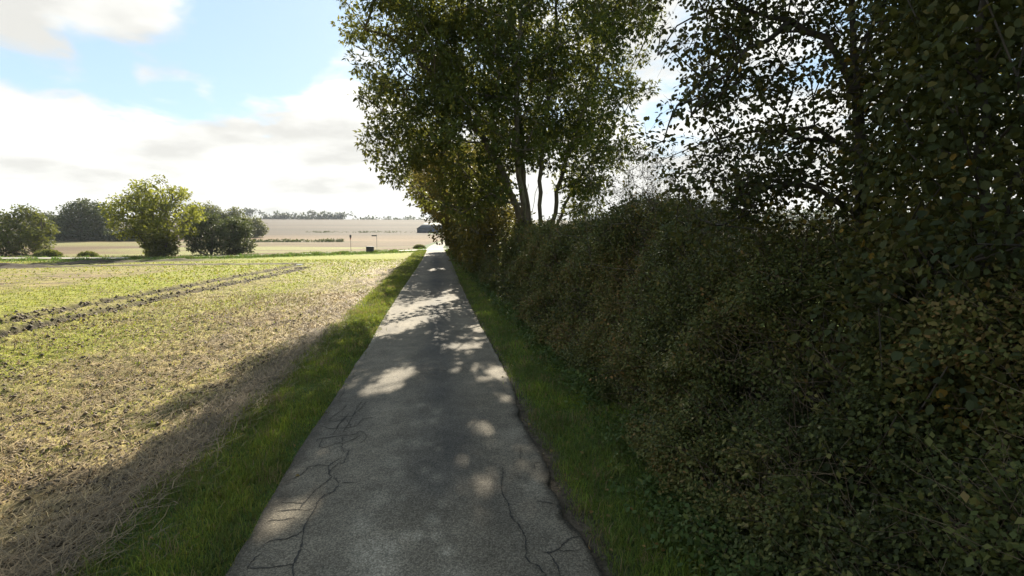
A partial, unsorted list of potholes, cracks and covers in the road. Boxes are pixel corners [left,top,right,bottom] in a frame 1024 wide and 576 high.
crack [501,447,579,575]
crack [246,451,352,576]
crack [316,388,373,452]
